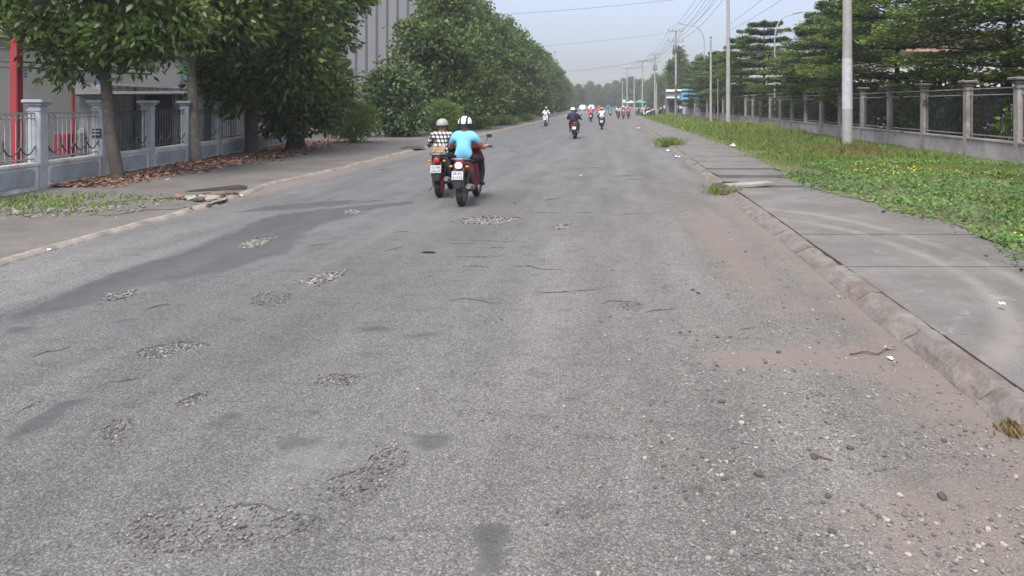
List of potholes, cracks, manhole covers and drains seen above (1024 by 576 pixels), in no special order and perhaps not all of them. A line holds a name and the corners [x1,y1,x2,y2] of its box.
pothole [456,215,523,225]
pothole [308,370,370,392]
pothole [246,290,300,310]
crack [100,377,144,386]
pothole [232,234,276,248]
pothole [294,269,355,288]
pothole [89,289,146,305]
pothole [135,339,214,361]
pothole [67,488,357,571]
pothole [315,444,414,514]
crack [534,289,677,313]
